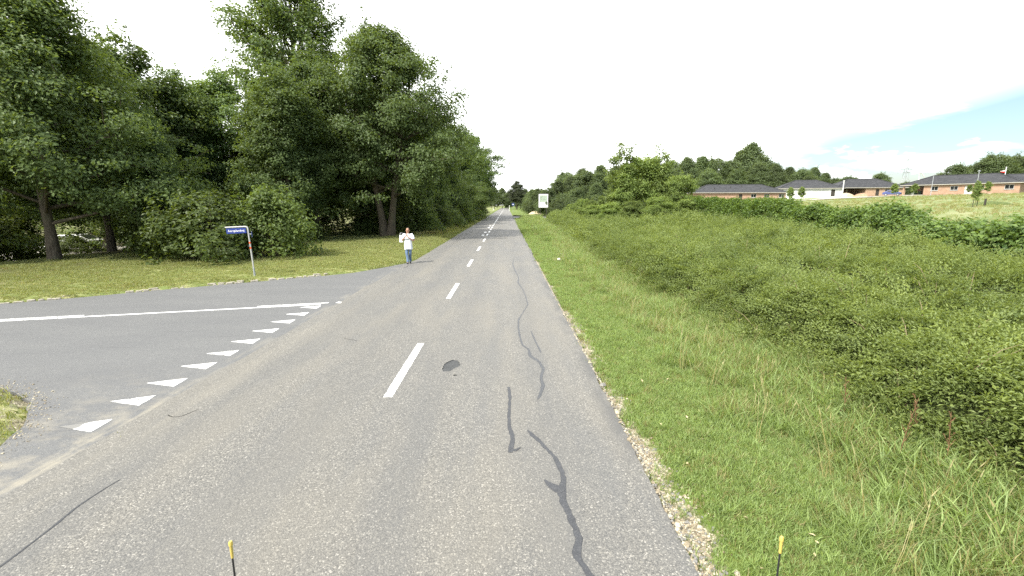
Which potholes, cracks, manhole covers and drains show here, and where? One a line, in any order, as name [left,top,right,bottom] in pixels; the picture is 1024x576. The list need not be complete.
pothole [442,360,460,371]
